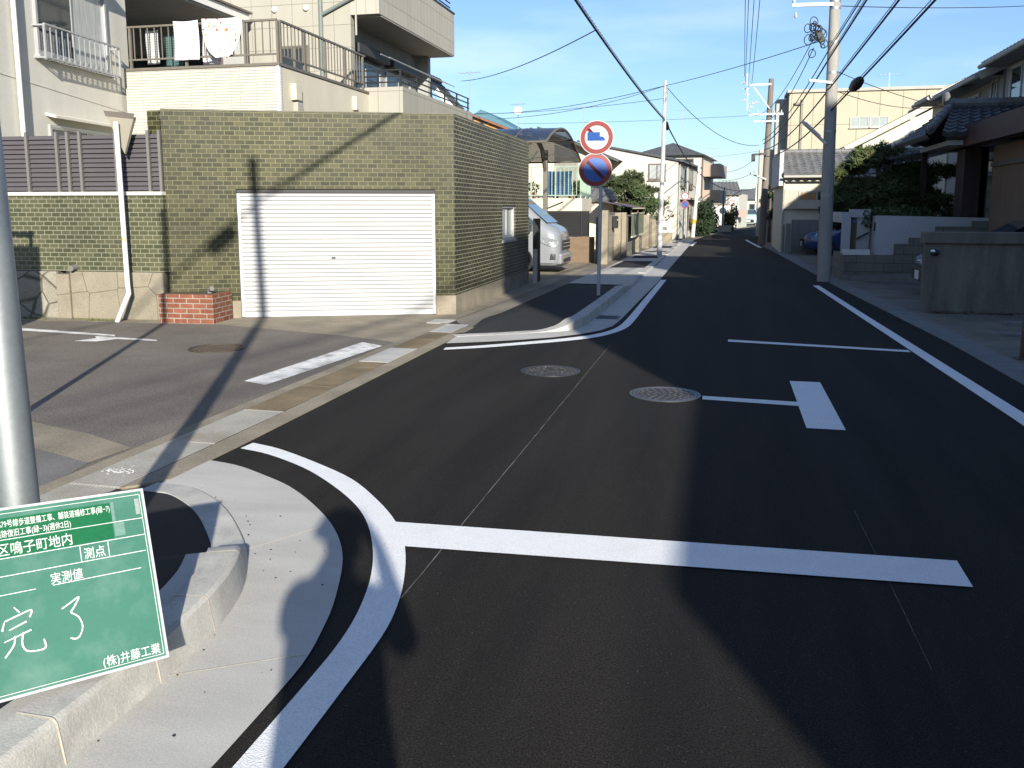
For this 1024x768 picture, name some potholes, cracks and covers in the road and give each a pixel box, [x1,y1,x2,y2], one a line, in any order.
manhole cover [188,343,245,353]
manhole cover [520,365,580,377]
manhole cover [629,387,701,402]
